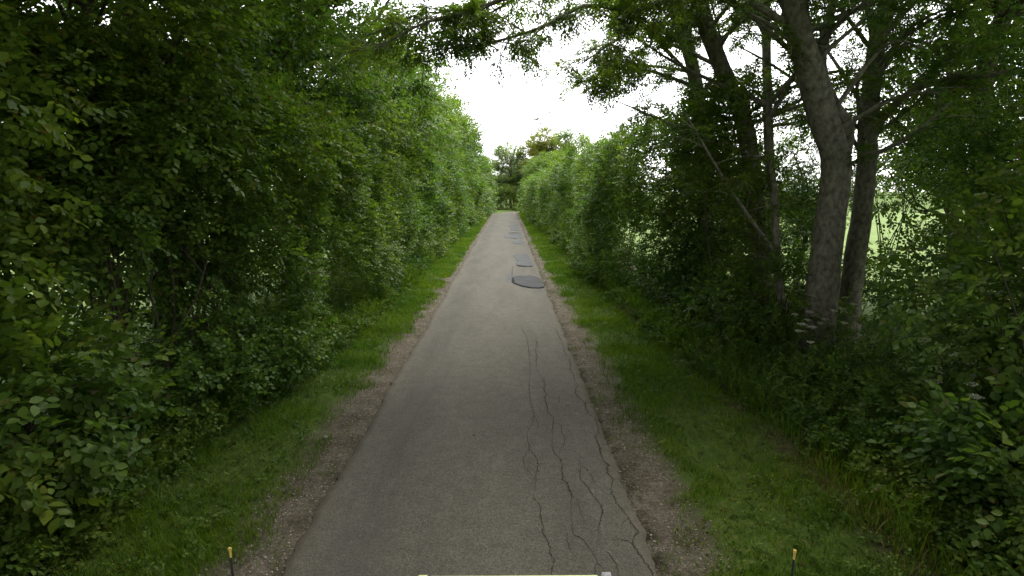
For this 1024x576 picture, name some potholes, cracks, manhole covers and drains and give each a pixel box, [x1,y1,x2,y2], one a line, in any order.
crack [521,326,653,576]
